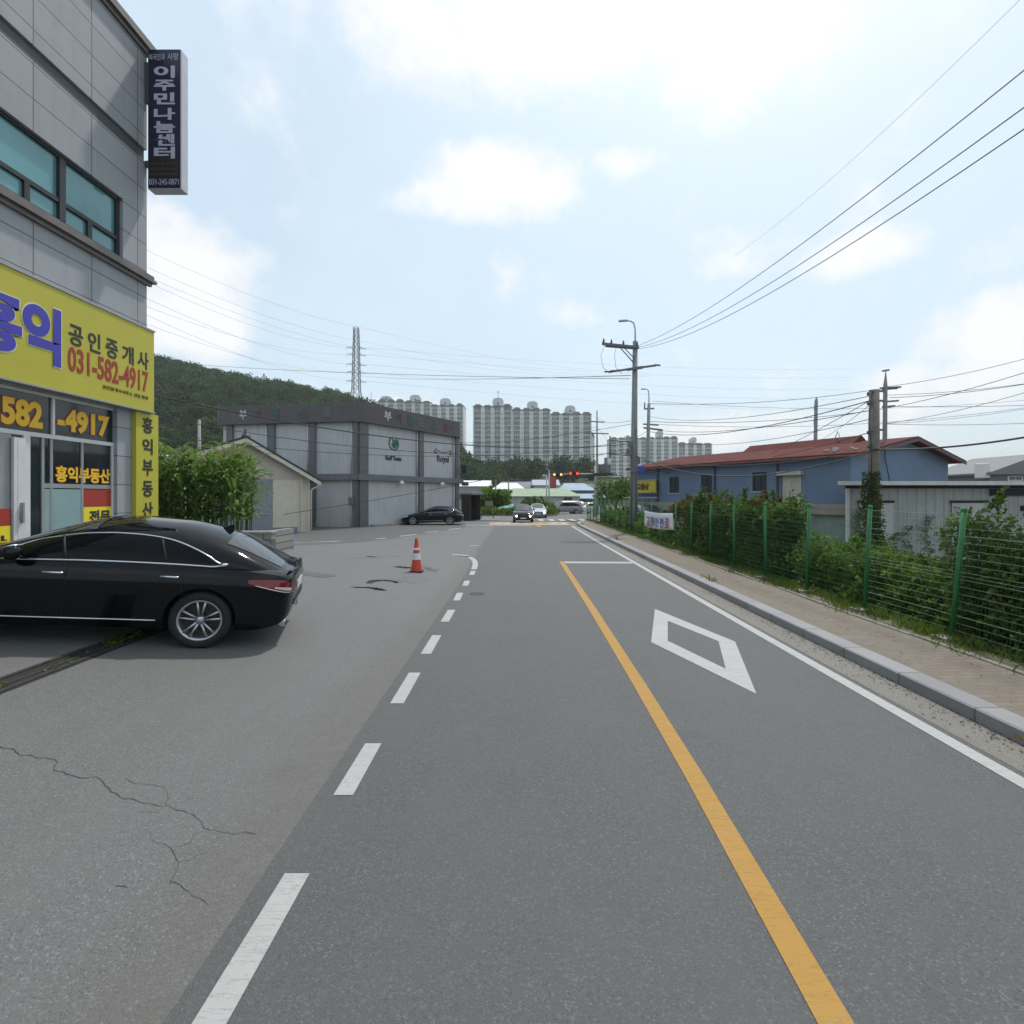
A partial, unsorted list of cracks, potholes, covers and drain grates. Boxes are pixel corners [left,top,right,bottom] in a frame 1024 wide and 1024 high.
crack [0,746,255,906]
